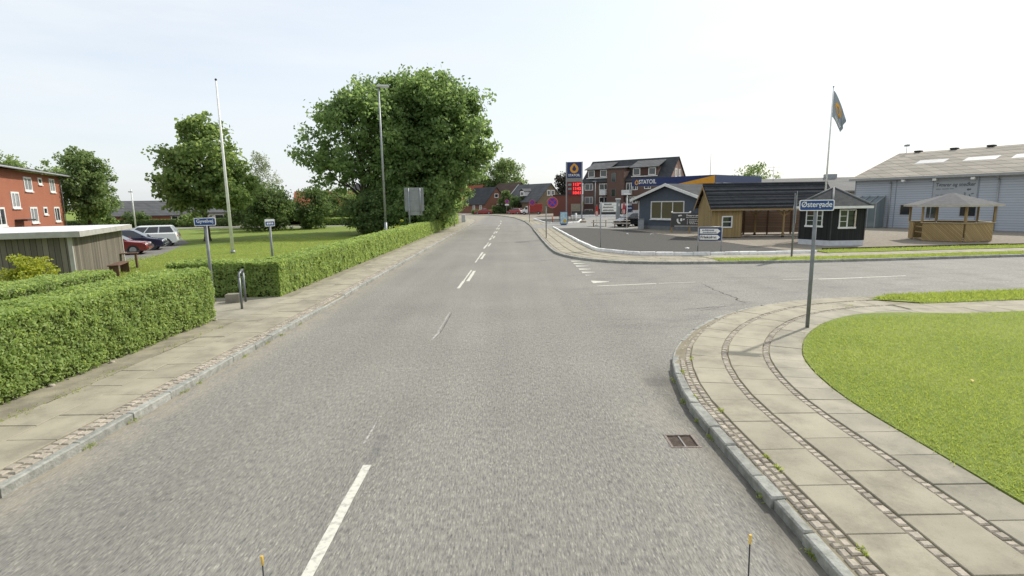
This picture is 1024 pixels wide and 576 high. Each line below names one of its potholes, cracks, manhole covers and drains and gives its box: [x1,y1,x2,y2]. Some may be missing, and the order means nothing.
drain grate [663,434,702,448]
